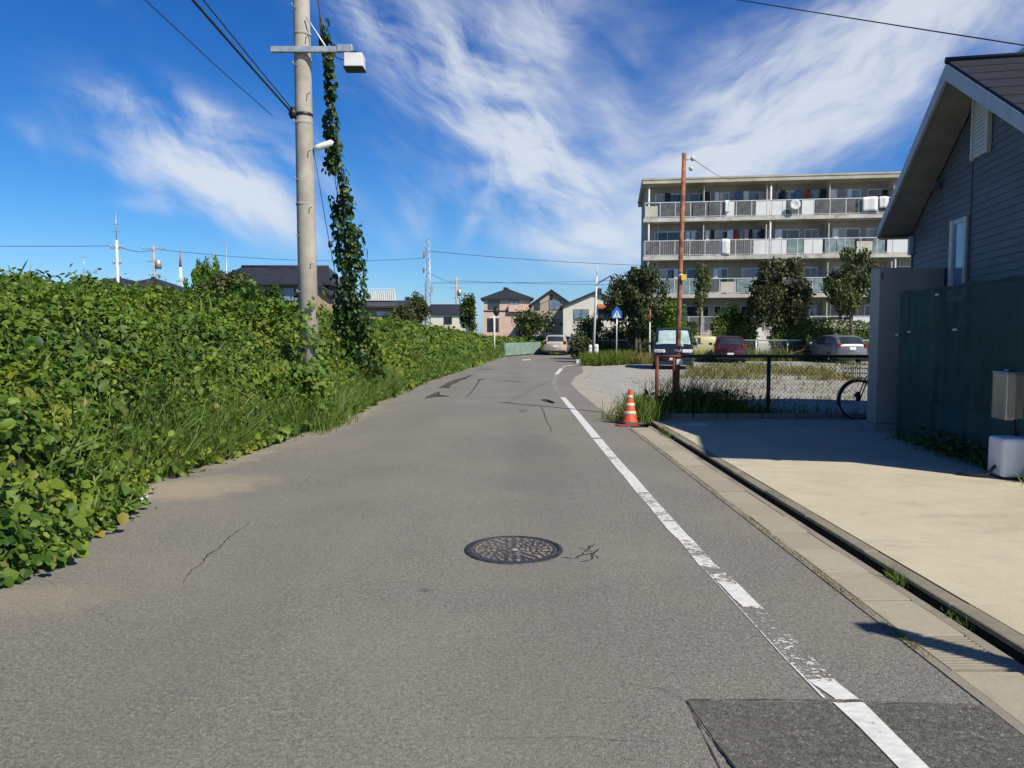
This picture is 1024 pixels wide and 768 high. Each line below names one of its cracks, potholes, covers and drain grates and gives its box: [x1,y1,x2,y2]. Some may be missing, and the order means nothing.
crack [565,543,599,561]
manhole cover [464,536,563,564]
